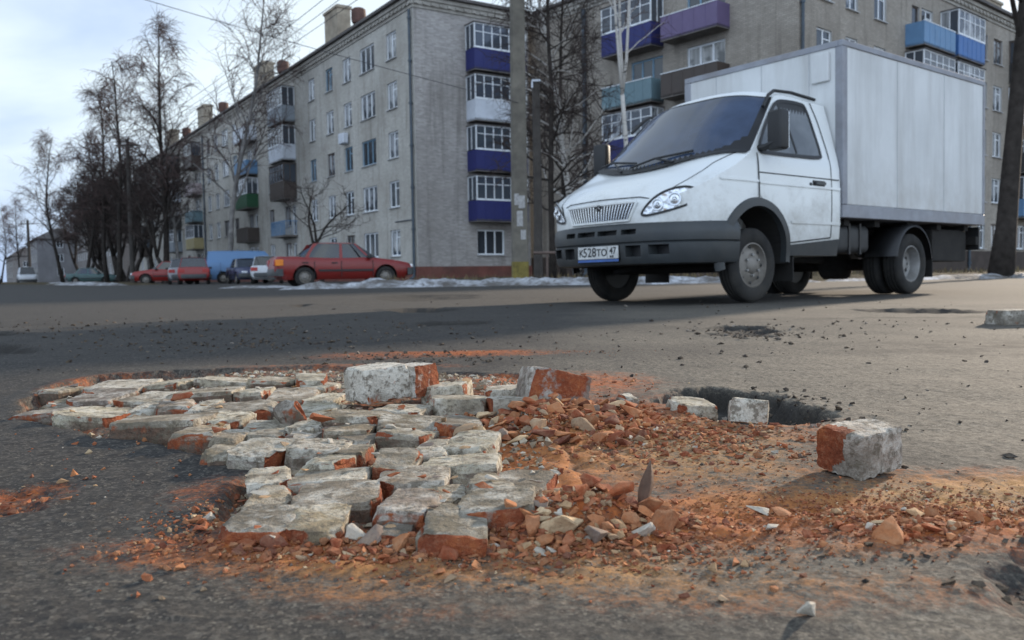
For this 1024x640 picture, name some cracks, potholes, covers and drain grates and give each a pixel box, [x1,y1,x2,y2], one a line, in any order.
pothole [701,325,782,340]
pothole [18,365,636,540]
pothole [648,387,842,426]
